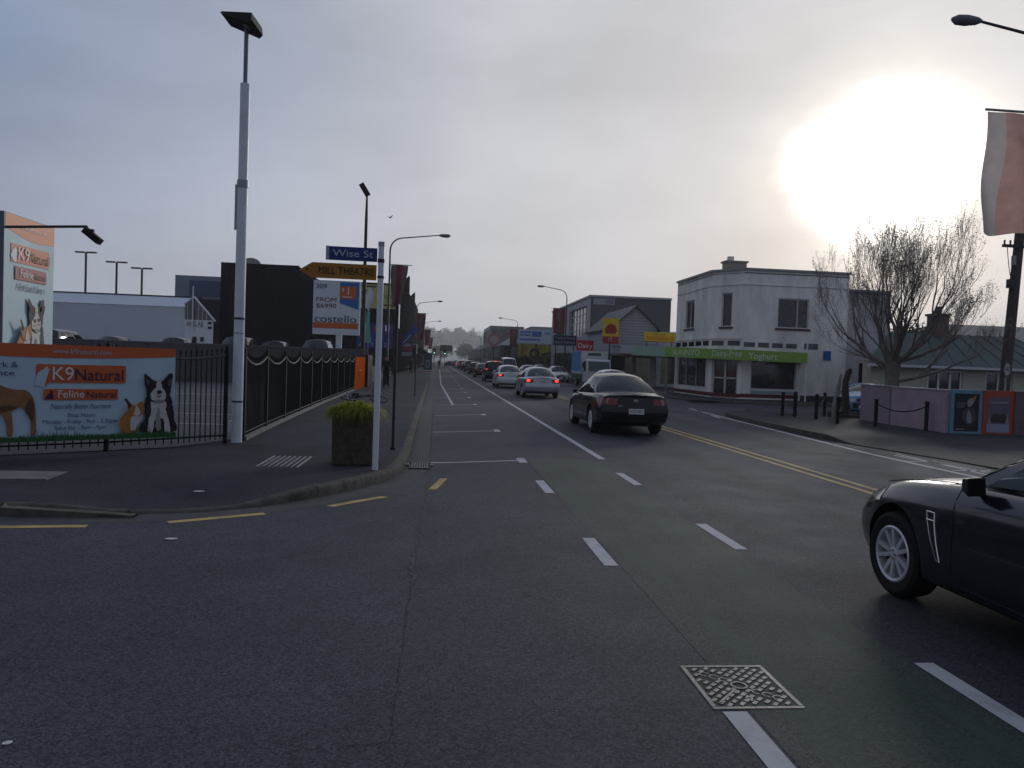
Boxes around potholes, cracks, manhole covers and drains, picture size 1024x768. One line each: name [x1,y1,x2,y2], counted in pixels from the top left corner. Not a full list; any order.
manhole cover [680,665,806,710]
